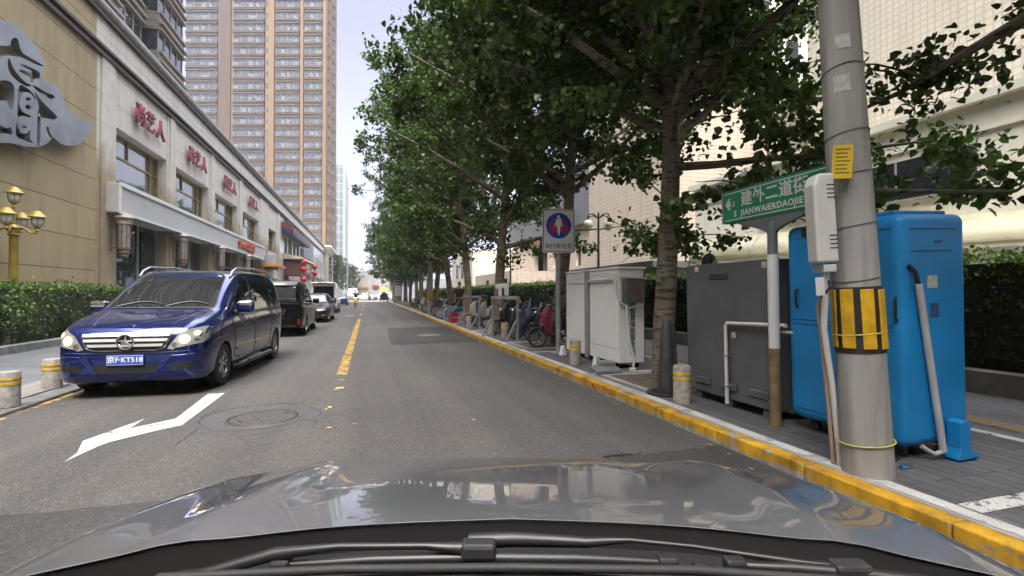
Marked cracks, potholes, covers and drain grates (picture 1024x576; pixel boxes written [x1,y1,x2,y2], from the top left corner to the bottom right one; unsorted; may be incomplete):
manhole cover [223,409,302,427]
